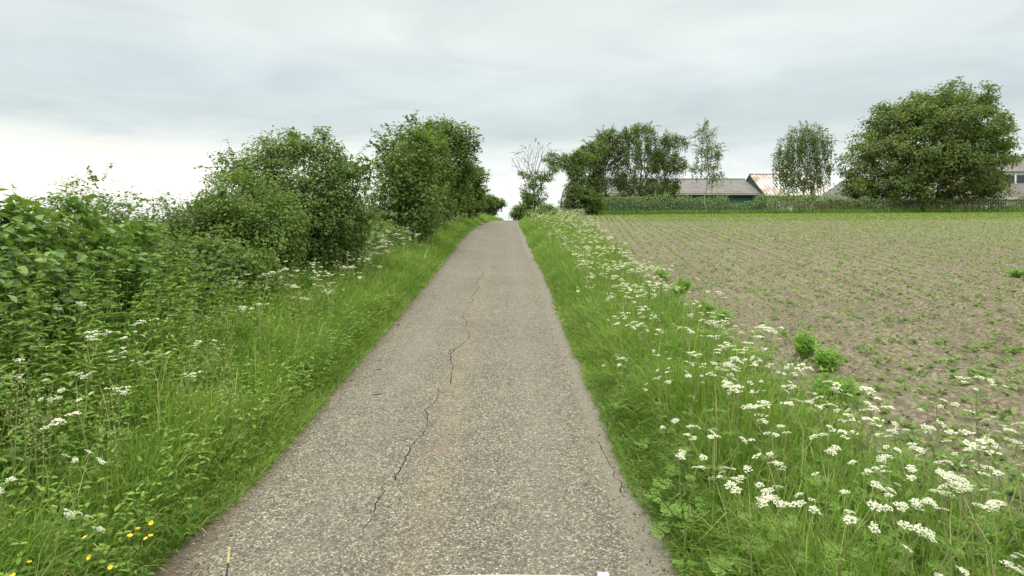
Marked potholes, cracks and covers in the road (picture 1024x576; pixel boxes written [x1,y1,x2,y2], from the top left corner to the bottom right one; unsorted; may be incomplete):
crack [363,274,484,535]
